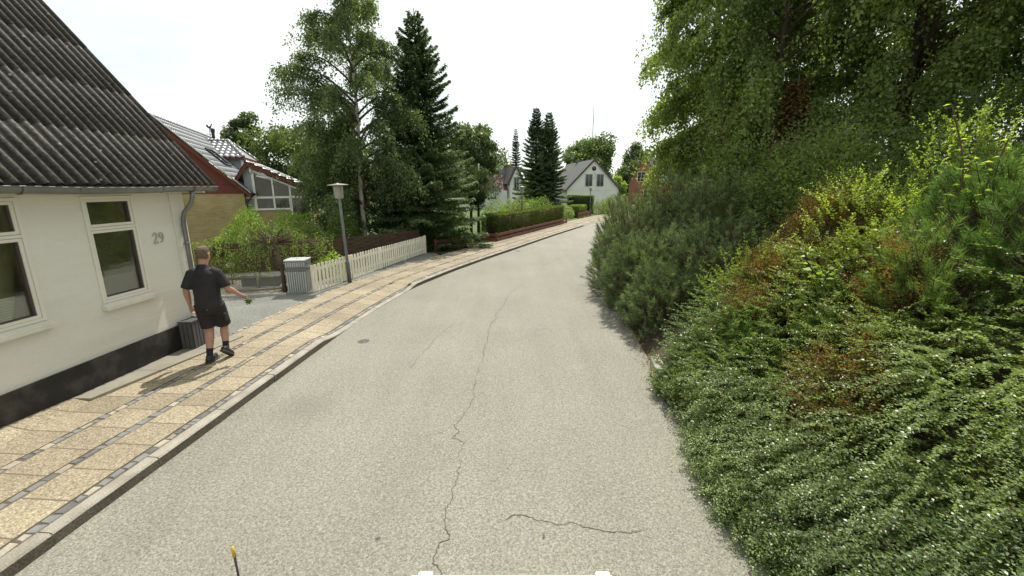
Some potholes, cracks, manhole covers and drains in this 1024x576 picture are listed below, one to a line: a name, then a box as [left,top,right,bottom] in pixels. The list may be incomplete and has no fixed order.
crack [426,255,585,575]
crack [500,514,646,533]
